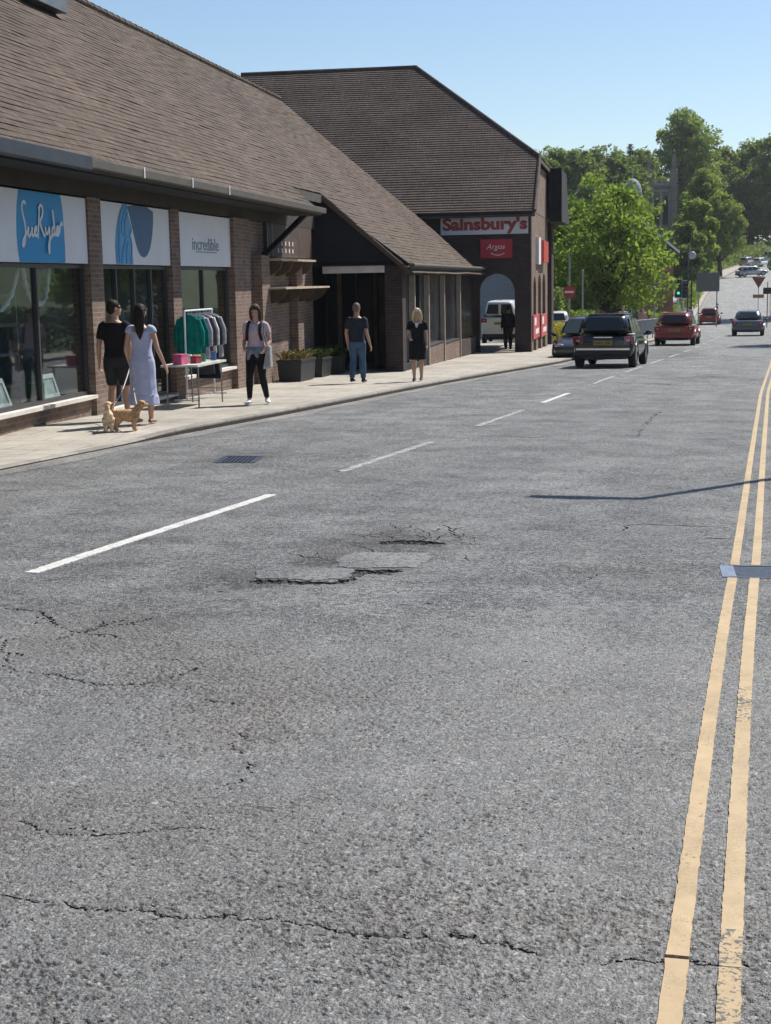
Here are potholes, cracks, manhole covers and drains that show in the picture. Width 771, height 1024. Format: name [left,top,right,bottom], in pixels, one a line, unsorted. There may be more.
crack [46,660,197,688]
crack [0,612,152,669]
crack [12,897,541,957]
crack [23,822,205,837]
crack [601,959,718,967]
